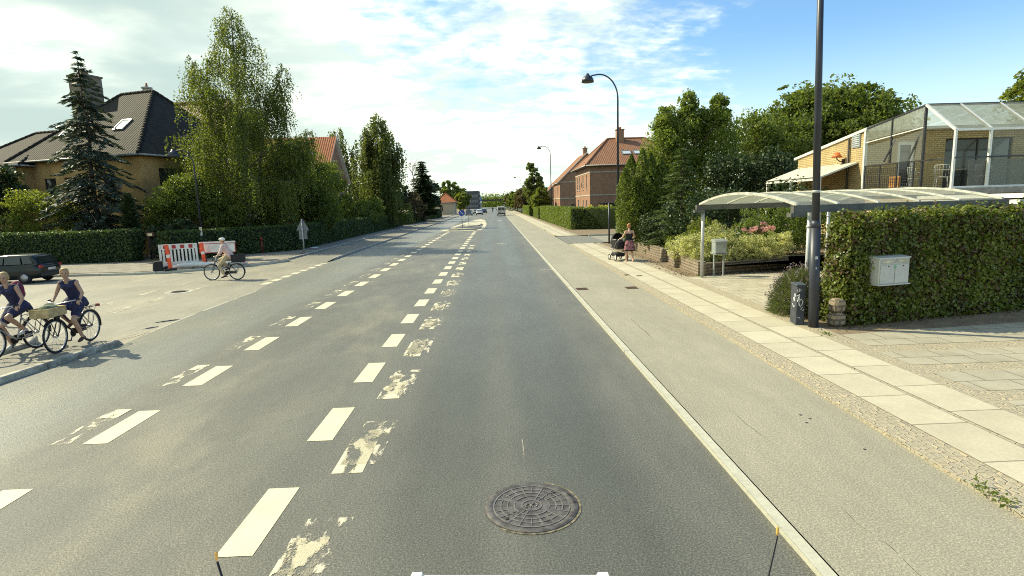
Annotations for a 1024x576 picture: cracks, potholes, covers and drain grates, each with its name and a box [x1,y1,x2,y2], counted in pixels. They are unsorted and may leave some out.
manhole cover [485,482,582,535]
